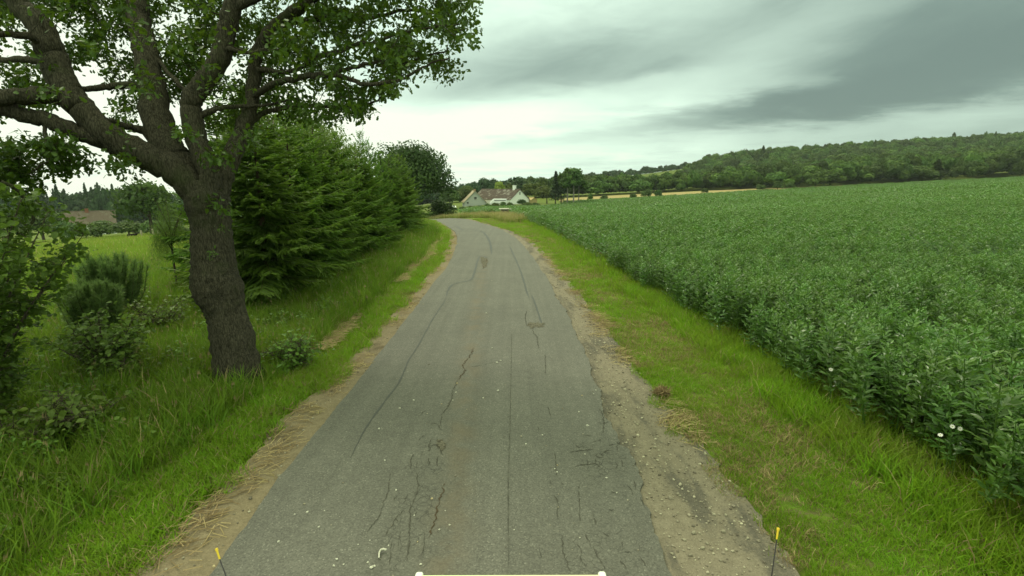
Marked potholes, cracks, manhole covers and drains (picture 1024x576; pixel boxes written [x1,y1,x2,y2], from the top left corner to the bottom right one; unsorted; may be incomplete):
crack [369,351,497,563]
crack [550,408,645,570]
